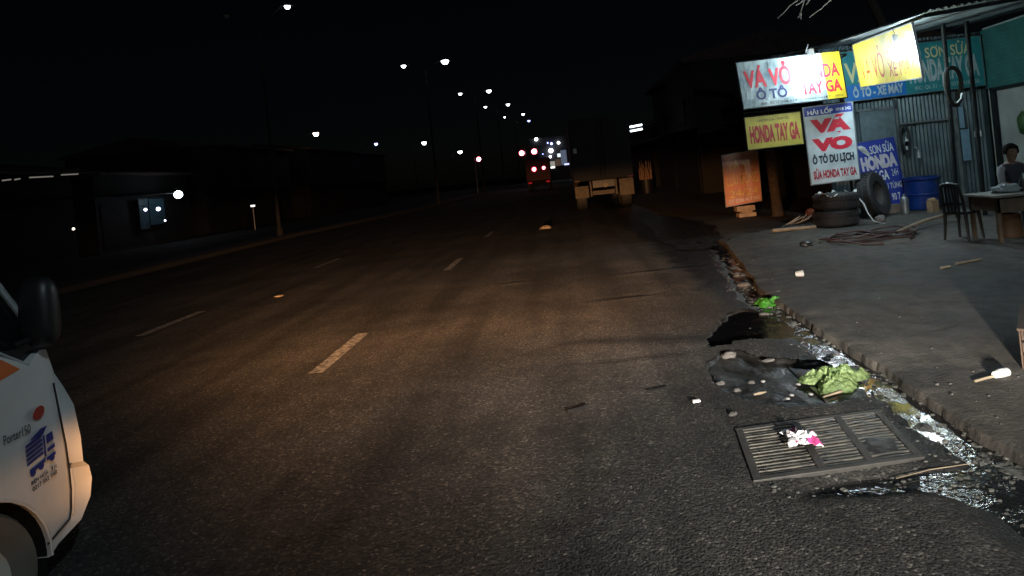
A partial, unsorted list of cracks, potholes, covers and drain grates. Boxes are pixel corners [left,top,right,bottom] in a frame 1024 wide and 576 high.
pothole [705,309,797,347]
drain grate [735,409,925,482]
pothole [704,350,867,407]
